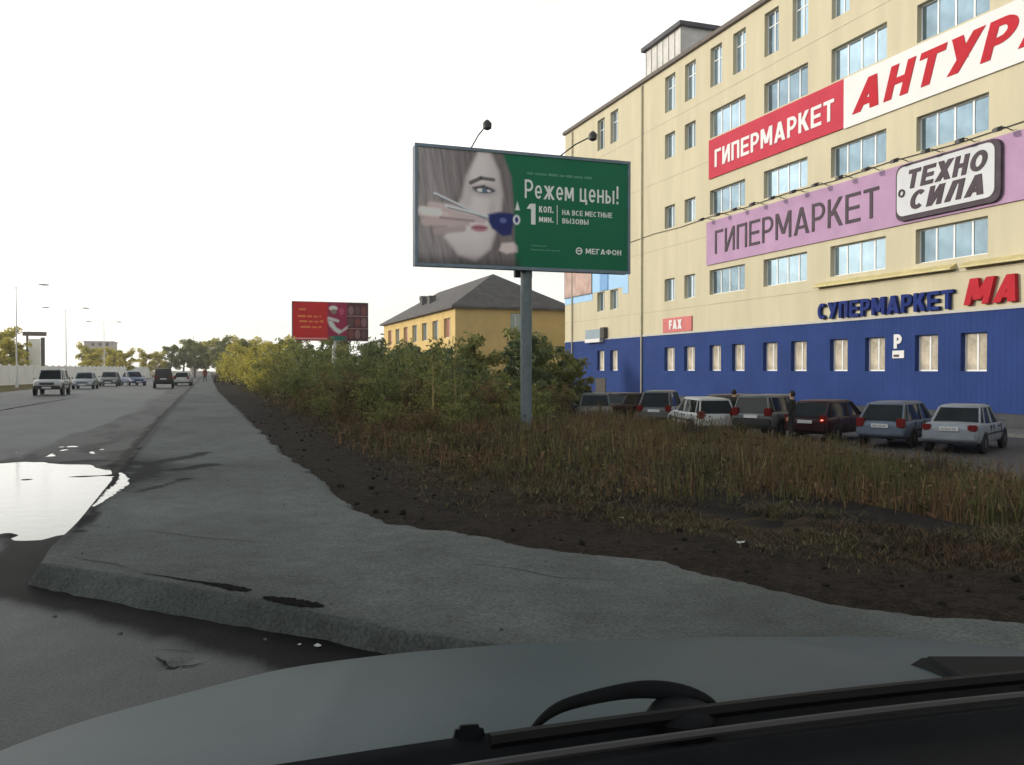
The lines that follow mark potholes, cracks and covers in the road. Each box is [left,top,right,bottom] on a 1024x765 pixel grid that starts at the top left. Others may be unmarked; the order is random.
crack [145,573,324,607]
